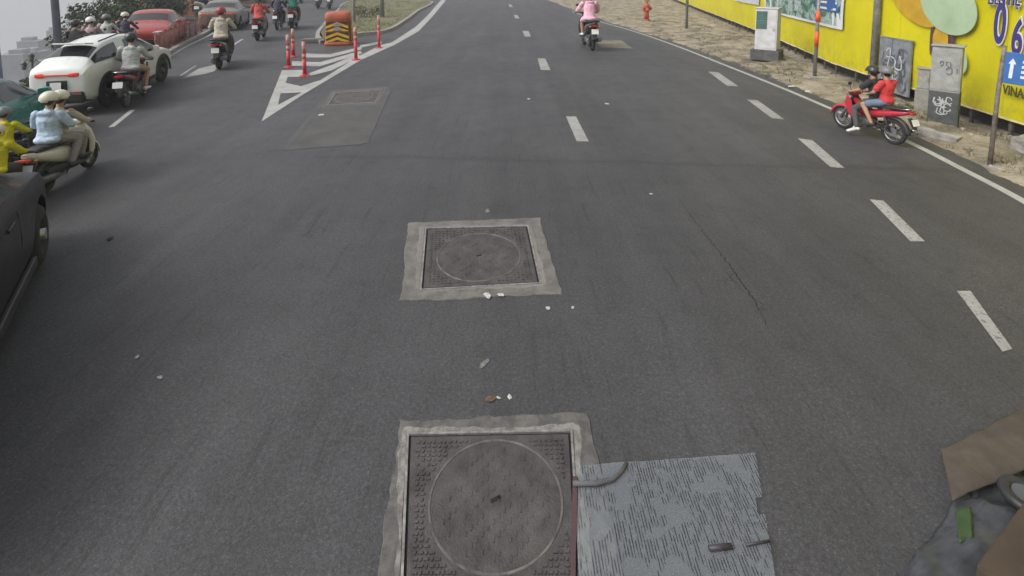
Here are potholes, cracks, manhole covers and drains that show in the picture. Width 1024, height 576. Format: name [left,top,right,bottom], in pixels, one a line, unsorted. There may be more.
manhole cover [322,87,388,107]
crack [682,202,768,328]
manhole cover [378,412,624,576]
manhole cover [399,218,562,301]
